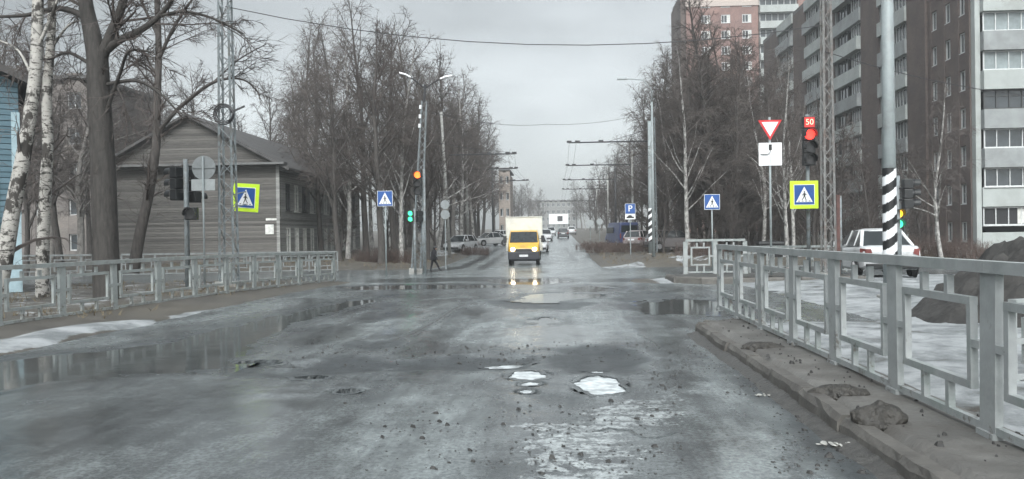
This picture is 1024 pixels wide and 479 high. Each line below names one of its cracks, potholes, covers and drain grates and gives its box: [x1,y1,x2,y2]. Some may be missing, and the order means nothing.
pothole [503,370,554,381]
pothole [222,359,288,369]
pothole [565,374,632,397]
pothole [476,362,538,370]
pothole [332,387,365,395]
crack [593,427,677,438]
